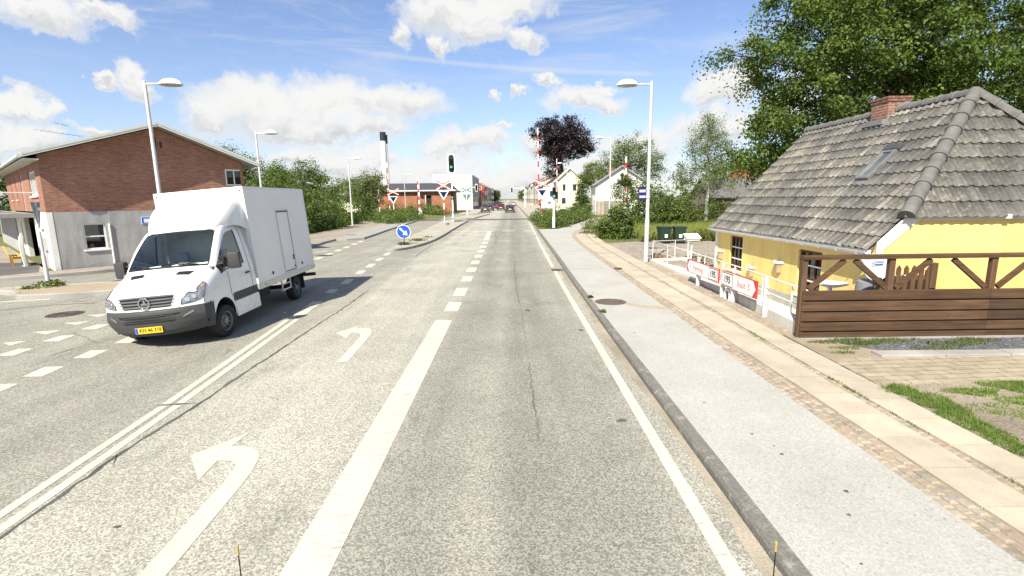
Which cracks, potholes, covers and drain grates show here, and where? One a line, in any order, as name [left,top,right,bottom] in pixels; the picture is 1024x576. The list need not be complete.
crack [521,307,541,440]
